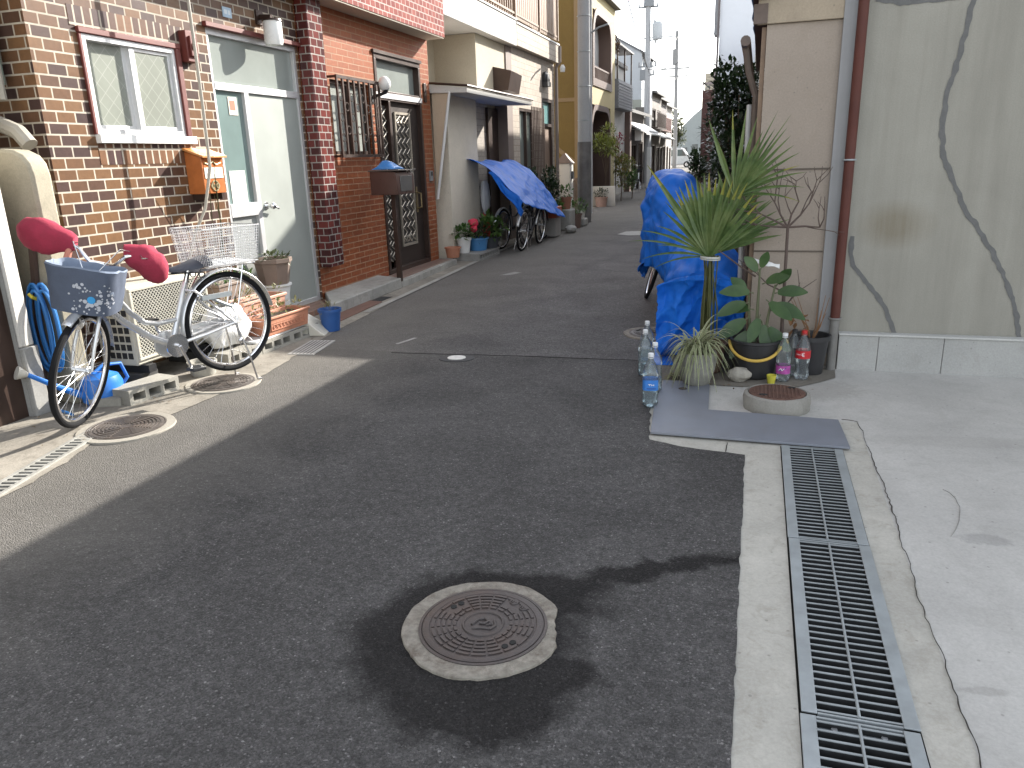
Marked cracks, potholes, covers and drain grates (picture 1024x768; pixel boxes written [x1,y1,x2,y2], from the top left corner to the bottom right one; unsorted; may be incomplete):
drain grate [788,537,921,732]
drain grate [800,713,930,768]
manhole cover [75,412,177,445]
manhole cover [185,373,262,394]
manhole cover [401,582,557,681]
drain grate [0,426,93,496]
drain grate [288,340,335,355]
drain grate [781,445,869,546]
utility cover [743,384,811,416]
manhole cover [623,327,656,340]
